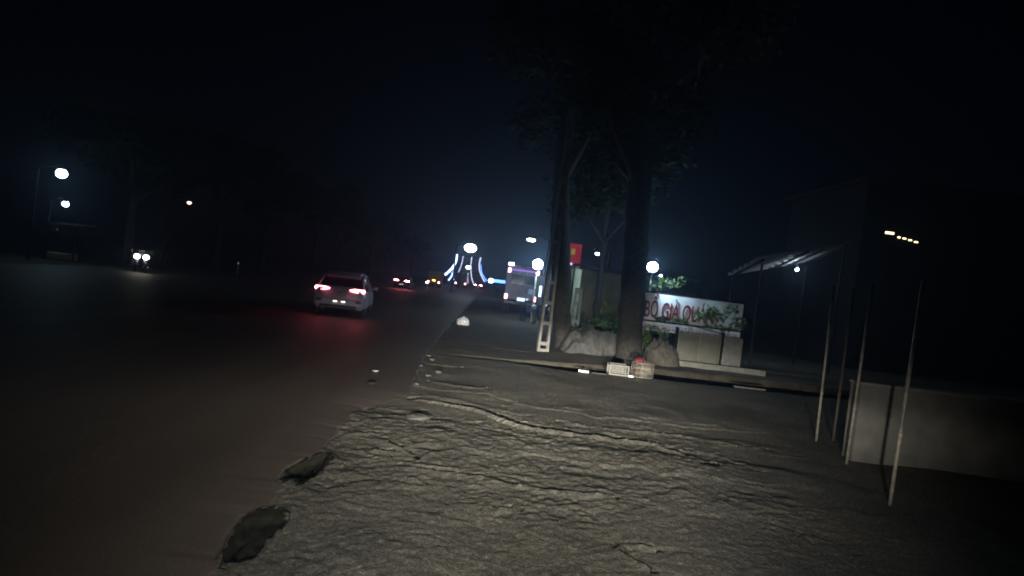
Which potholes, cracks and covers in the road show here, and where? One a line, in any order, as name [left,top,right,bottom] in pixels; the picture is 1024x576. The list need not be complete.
crack [609,535,662,575]
crack [336,362,765,515]
pothole [278,452,337,488]
pothole [213,504,293,575]
